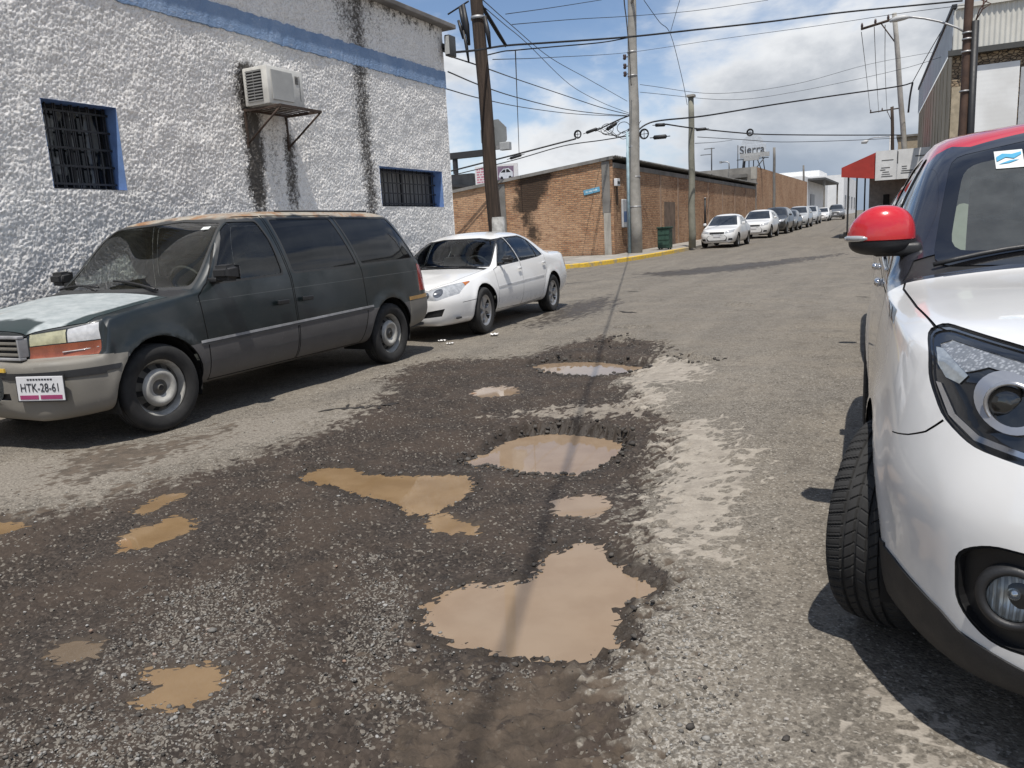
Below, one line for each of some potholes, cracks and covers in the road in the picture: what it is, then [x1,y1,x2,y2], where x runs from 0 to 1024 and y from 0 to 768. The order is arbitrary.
pothole [445,416,647,482]
pothole [526,486,636,528]
pothole [511,351,670,380]
pothole [272,456,499,522]
pothole [378,527,693,688]
pothole [93,644,264,732]
pothole [451,382,541,401]
pothole [82,506,224,564]
pothole [403,507,502,546]
pothole [104,480,215,522]
